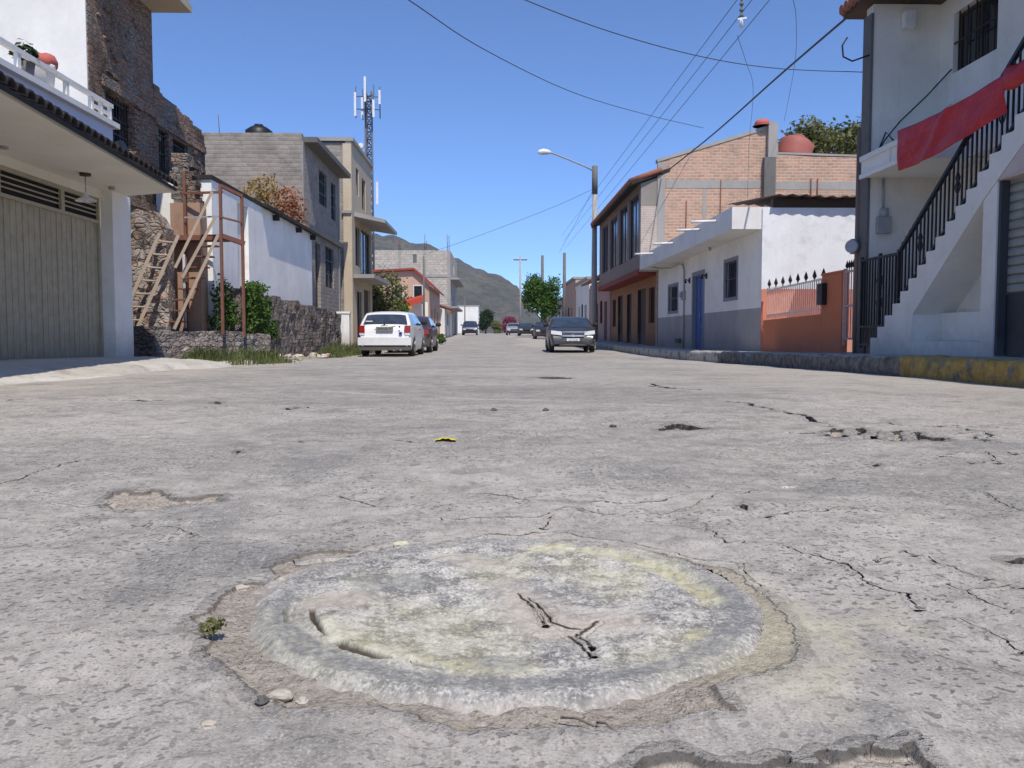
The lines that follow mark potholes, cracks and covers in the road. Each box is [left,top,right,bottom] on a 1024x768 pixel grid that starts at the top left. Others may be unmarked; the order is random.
pothole [89,488,234,513]
crack [884,422,1024,464]
pothole [841,425,877,436]
pothole [876,429,919,442]
pothole [606,730,951,768]
pothole [648,422,714,432]
crack [645,383,838,435]
crack [0,458,198,538]
pothole [816,427,860,440]
crack [293,489,1024,654]
pothole [900,430,958,442]
pothole [860,429,895,440]
